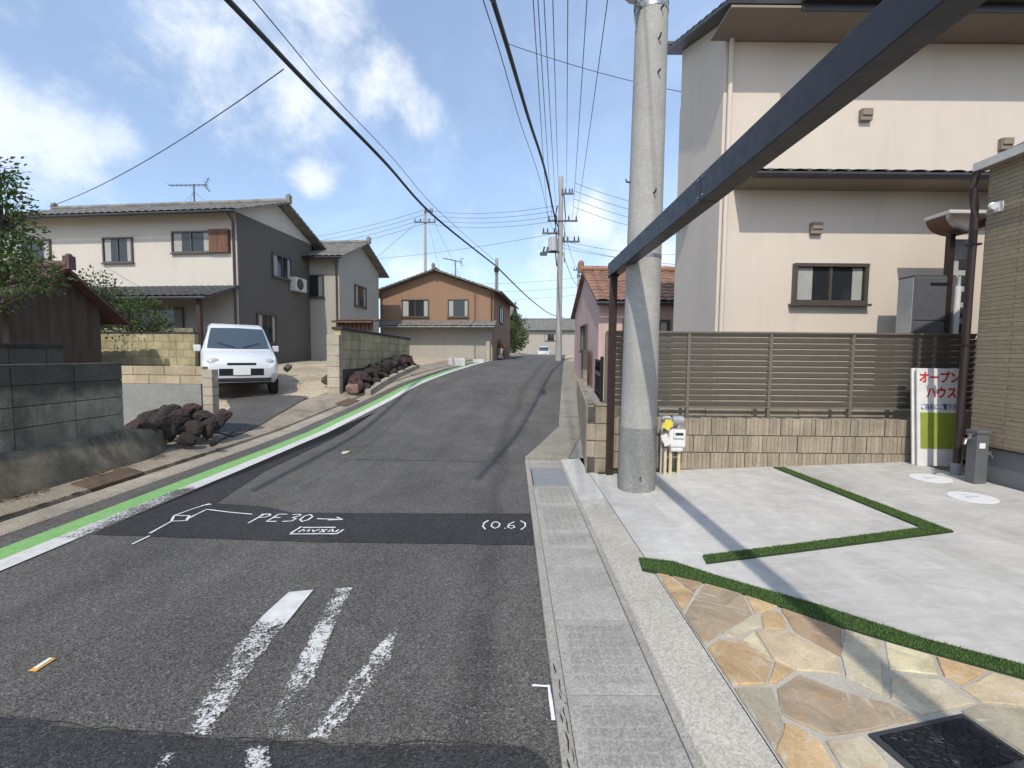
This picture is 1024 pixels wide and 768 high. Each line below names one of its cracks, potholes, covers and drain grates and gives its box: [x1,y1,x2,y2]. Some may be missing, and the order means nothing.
manhole cover [946,491,1000,504]
manhole cover [909,474,953,483]
